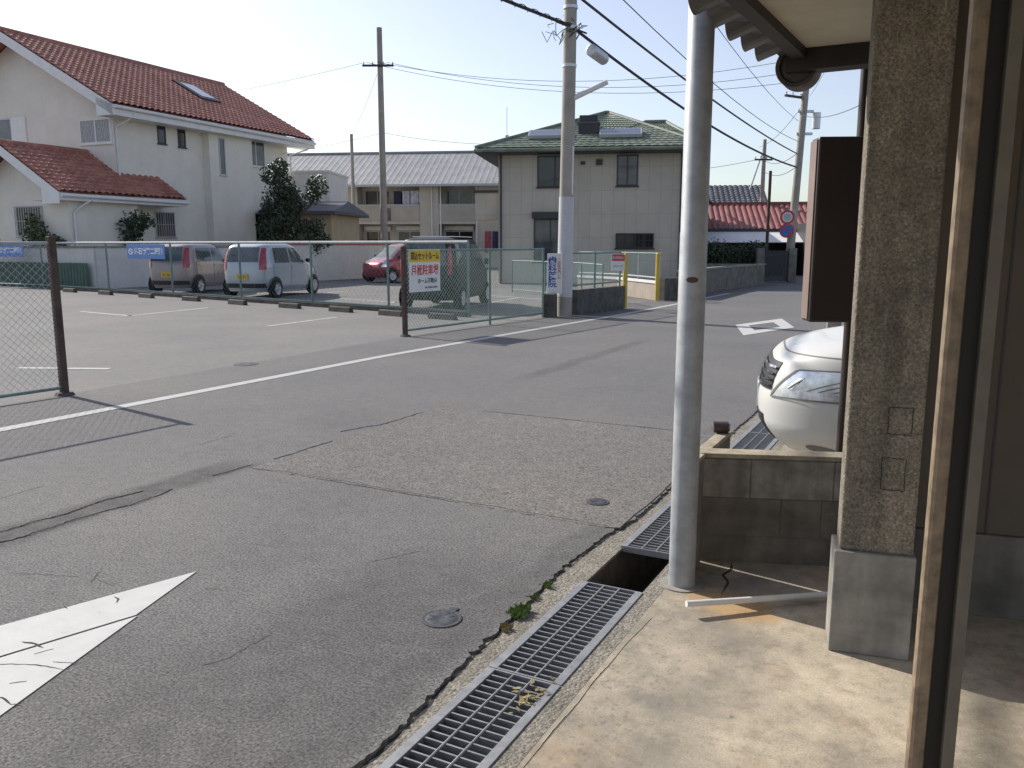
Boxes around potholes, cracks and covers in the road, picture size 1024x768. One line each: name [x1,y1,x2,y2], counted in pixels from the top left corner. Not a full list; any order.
manhole cover [586,498,609,506]
manhole cover [421,607,462,628]
drain grate [621,500,671,560]
drain grate [489,581,643,686]
drain grate [730,432,778,450]
crack [719,563,735,596]
drain grate [378,667,561,768]
